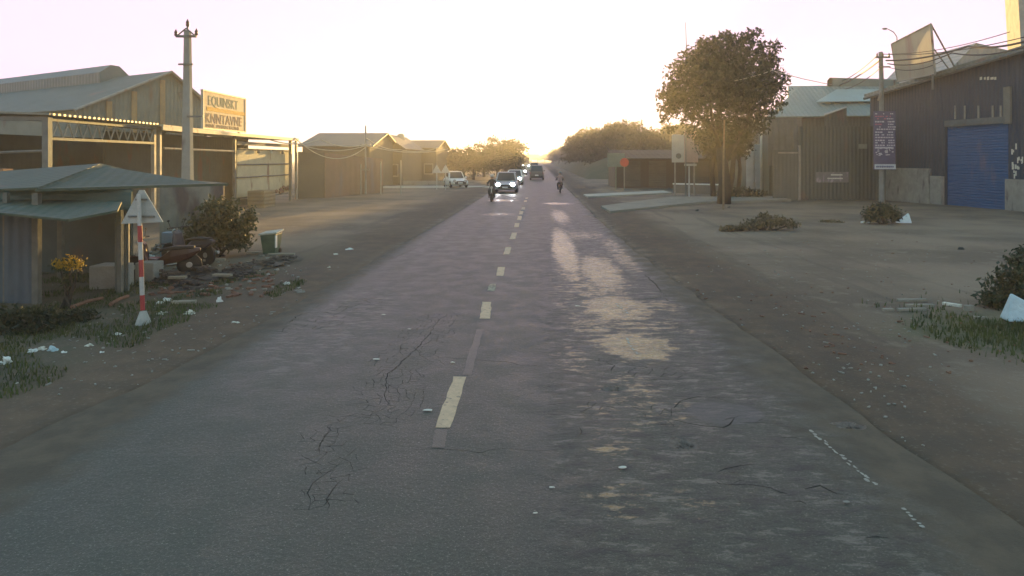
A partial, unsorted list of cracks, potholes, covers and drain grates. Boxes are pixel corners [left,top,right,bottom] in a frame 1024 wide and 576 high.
crack [579,392,804,441]
crack [716,464,848,504]
pothole [829,421,867,430]
crack [332,314,455,428]
crack [294,422,367,510]
